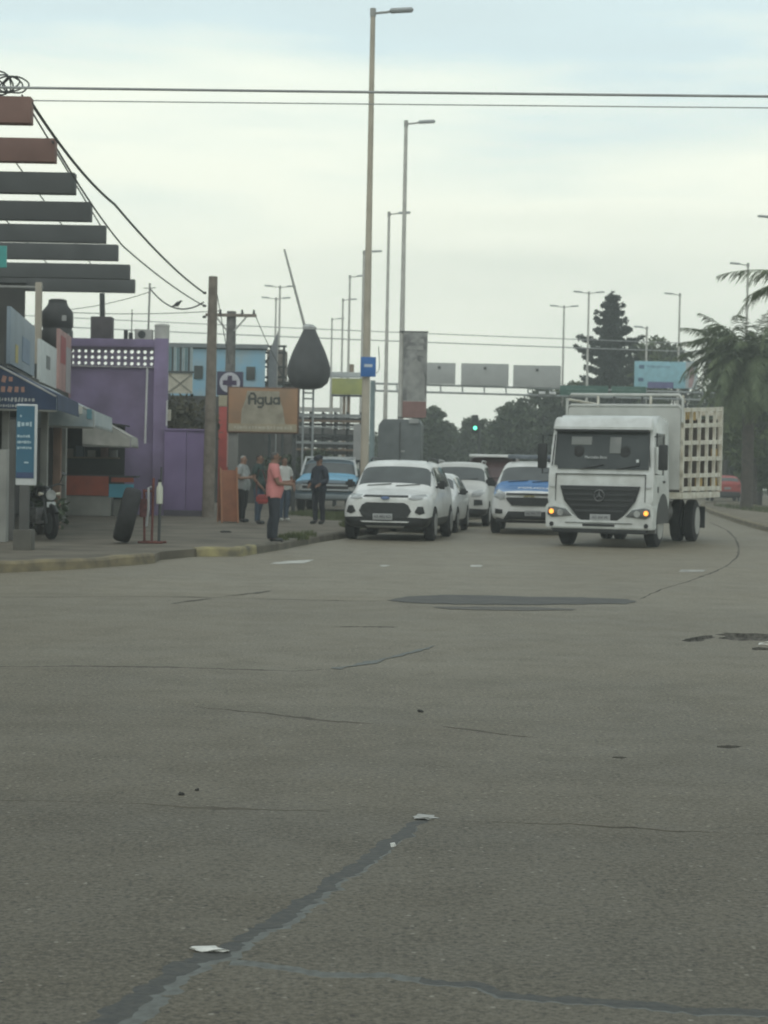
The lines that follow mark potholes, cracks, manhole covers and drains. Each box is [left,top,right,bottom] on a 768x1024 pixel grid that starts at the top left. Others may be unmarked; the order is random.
crack [3,800,317,811]
crack [640,523,740,599]
crack [443,726,533,738]
pothole [715,633,768,641]
crack [467,821,736,834]
crack [195,706,370,724]
